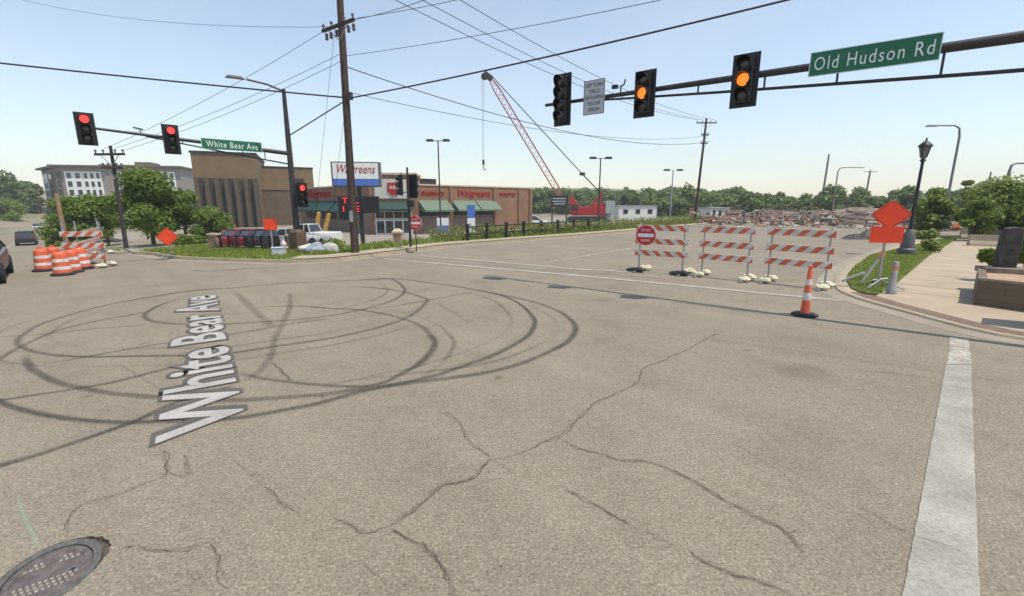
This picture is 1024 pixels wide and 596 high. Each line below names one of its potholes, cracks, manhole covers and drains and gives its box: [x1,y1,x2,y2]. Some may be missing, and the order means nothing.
manhole cover [0,539,103,596]
crack [128,544,227,588]
crack [336,331,799,596]
crack [64,450,188,530]
